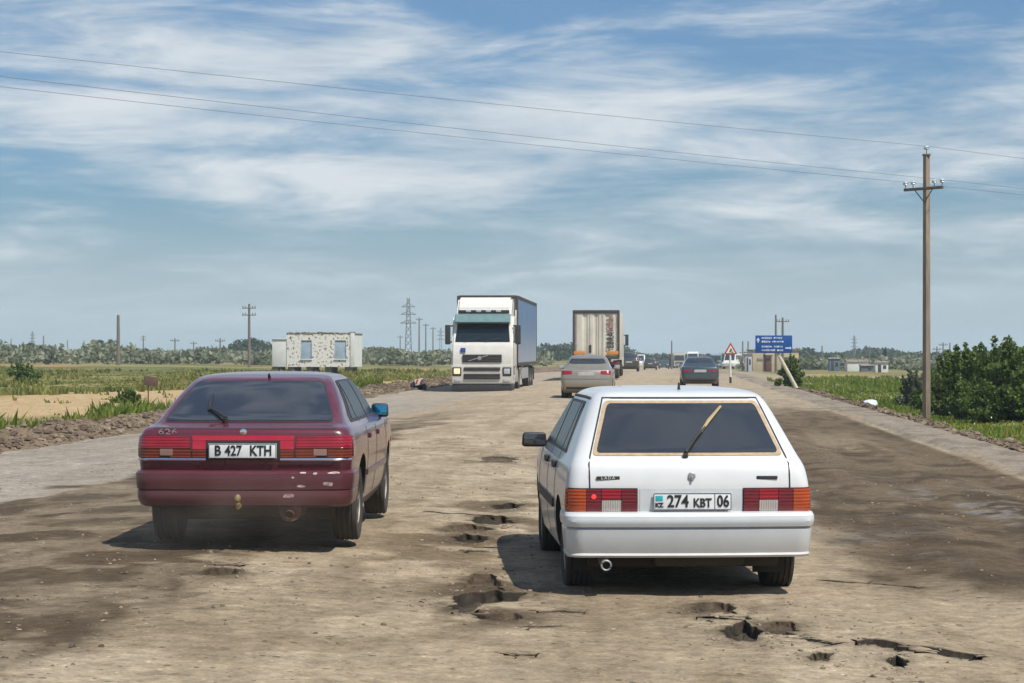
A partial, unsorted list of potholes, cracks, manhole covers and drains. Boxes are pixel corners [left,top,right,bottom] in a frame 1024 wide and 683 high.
pothole [456,612,543,626]
pothole [439,533,502,545]
crack [810,578,928,590]
pothole [698,619,772,645]
crack [696,614,988,662]
pothole [446,573,519,592]
pothole [761,621,820,642]
pothole [453,514,526,526]
crack [494,651,543,659]
